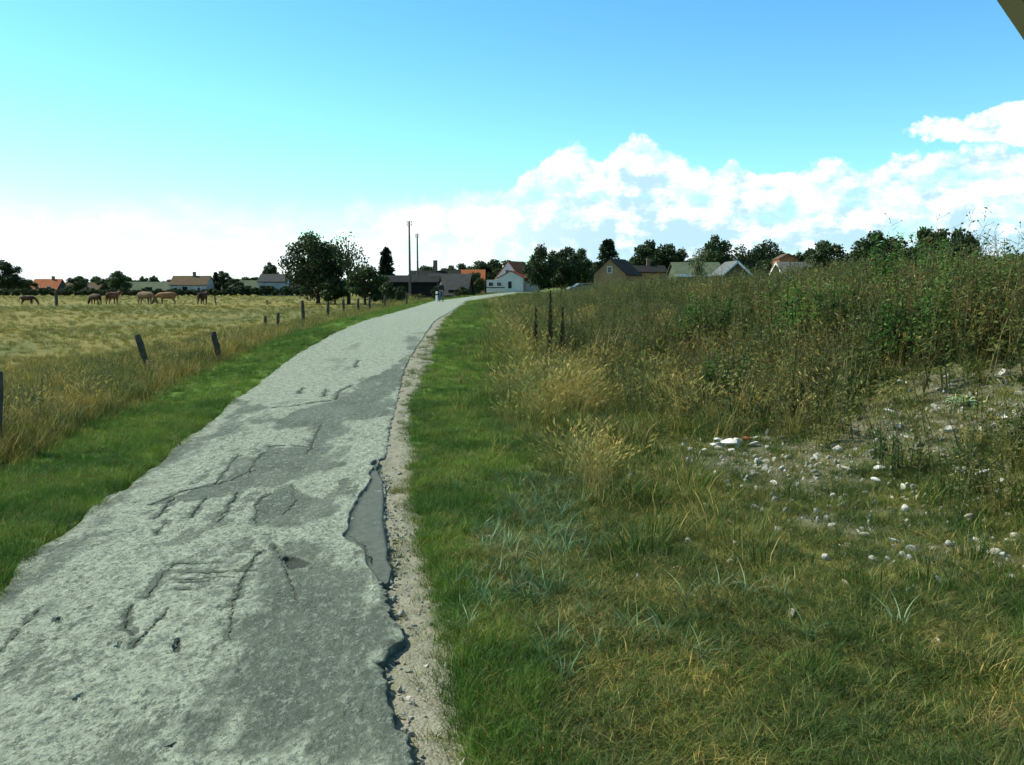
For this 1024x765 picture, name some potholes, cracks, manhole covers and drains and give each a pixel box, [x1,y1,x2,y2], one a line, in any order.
pothole [279,555,314,570]
pothole [170,637,185,653]
pothole [341,466,392,589]
crack [152,424,322,535]
crack [124,545,297,648]
